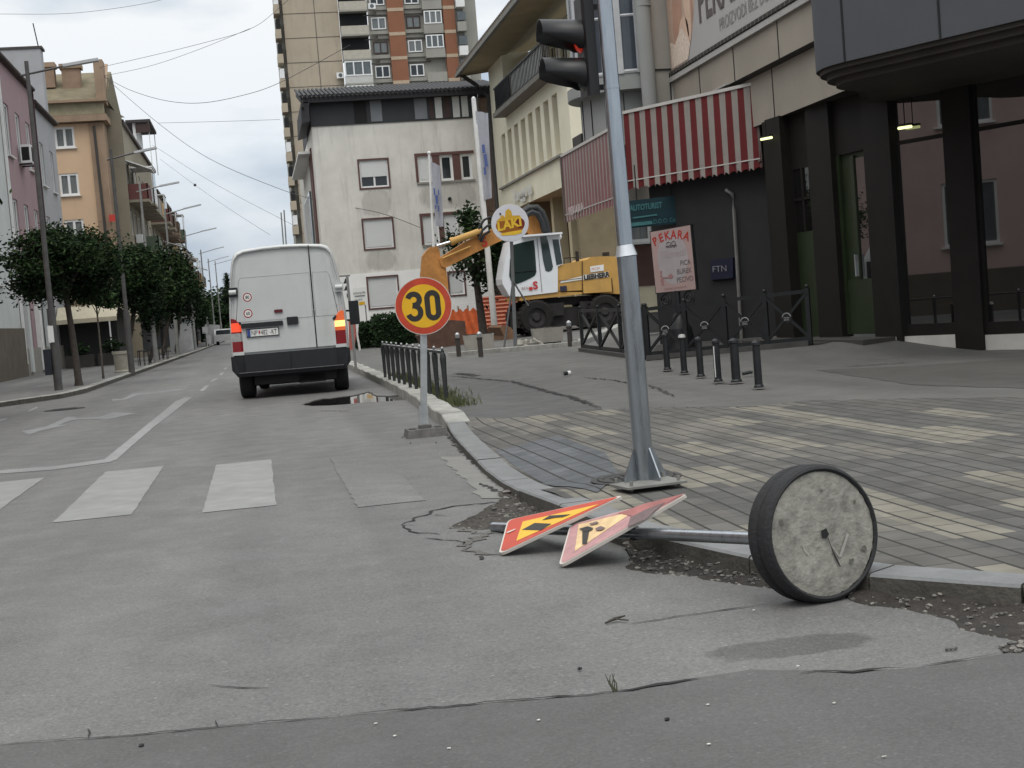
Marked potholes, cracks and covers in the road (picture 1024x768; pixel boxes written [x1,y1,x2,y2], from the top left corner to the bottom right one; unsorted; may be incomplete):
manhole cover [590,471,682,485]
crack [452,373,674,407]
crack [354,678,695,714]
pothole [452,490,545,530]
pothole [301,392,405,406]
crack [401,483,502,555]
crack [16,714,341,743]
